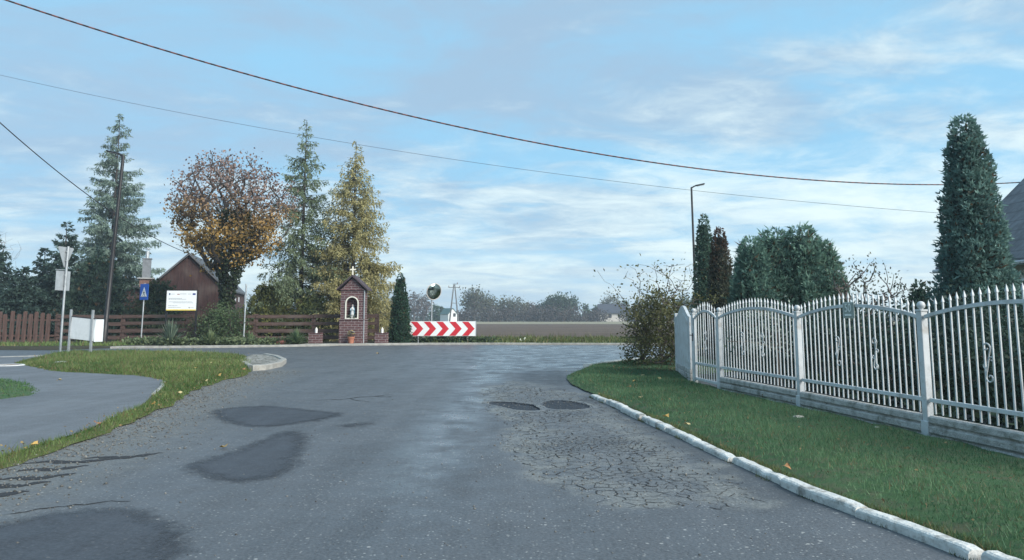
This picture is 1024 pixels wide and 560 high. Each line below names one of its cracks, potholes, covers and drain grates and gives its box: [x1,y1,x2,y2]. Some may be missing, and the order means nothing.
crack [4,500,113,515]
crack [482,381,765,509]
